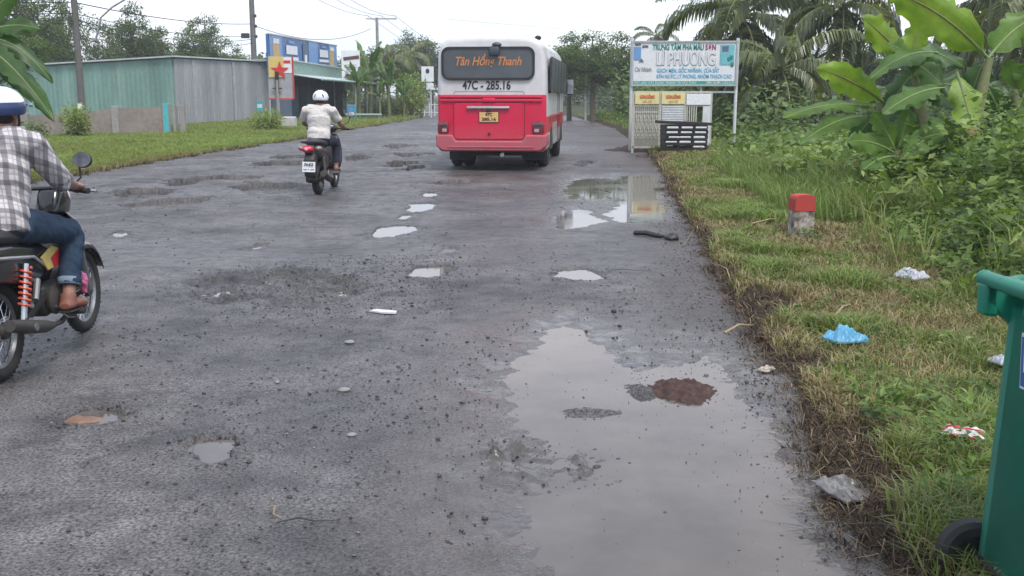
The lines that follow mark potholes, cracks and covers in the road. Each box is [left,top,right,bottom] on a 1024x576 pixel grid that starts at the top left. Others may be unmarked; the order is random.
pothole [120,188,174,198]
pothole [118,198,210,210]
pothole [160,265,387,310]
pothole [60,406,131,424]
pothole [405,264,457,278]
pothole [183,434,239,463]
pothole [372,225,417,238]
pothole [238,182,312,192]
pothole [402,202,439,212]
pothole [547,268,609,281]
pothole [168,176,252,186]
